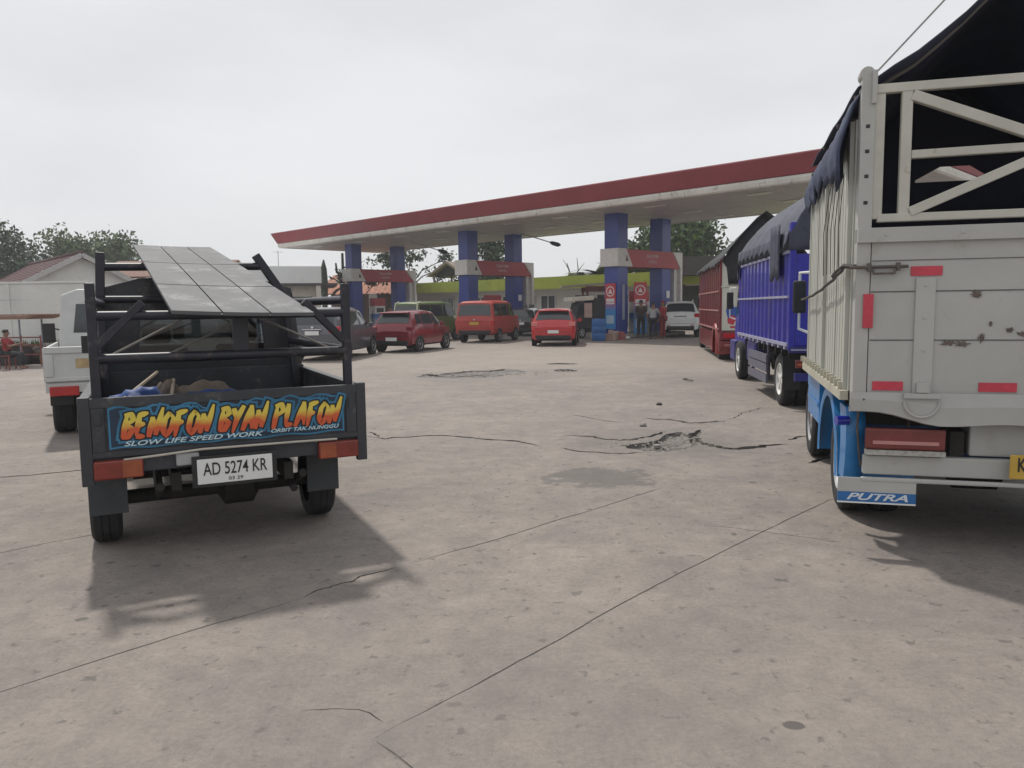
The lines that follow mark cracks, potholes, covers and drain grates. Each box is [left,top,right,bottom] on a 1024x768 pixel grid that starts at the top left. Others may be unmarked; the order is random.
crack [304,708,383,722]
crack [564,407,831,463]
pothole [416,369,525,379]
pothole [624,432,697,452]
crack [368,432,537,446]
crack [306,568,392,596]
